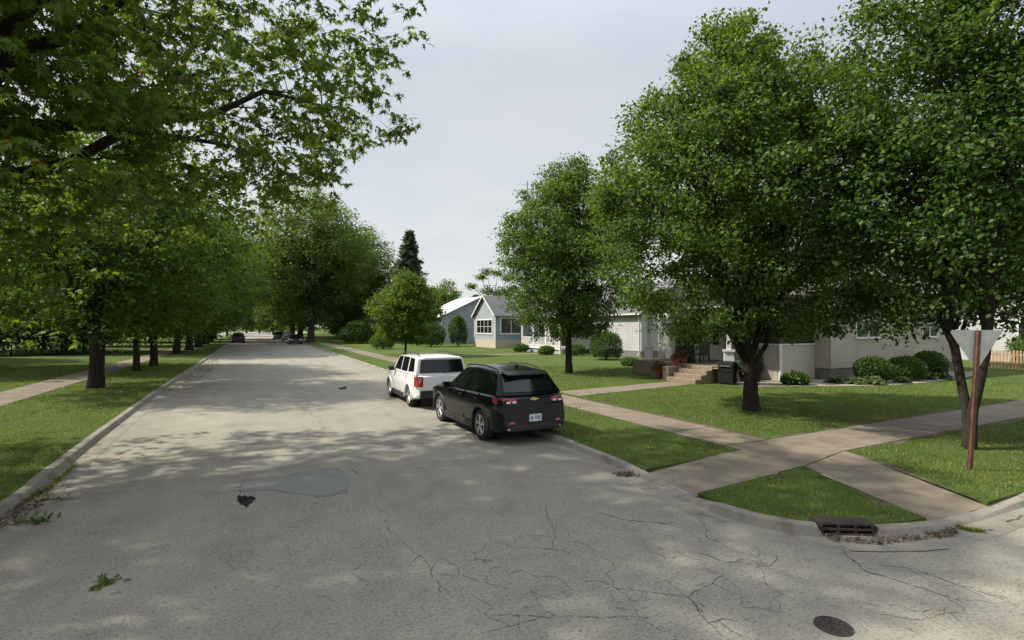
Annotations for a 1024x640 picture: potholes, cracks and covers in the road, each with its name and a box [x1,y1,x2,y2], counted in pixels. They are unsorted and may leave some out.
crack [843,550,1014,633]
manhole cover [813,616,854,637]
drain grate [808,516,878,536]
crack [223,468,781,637]
pothole [237,495,256,508]
